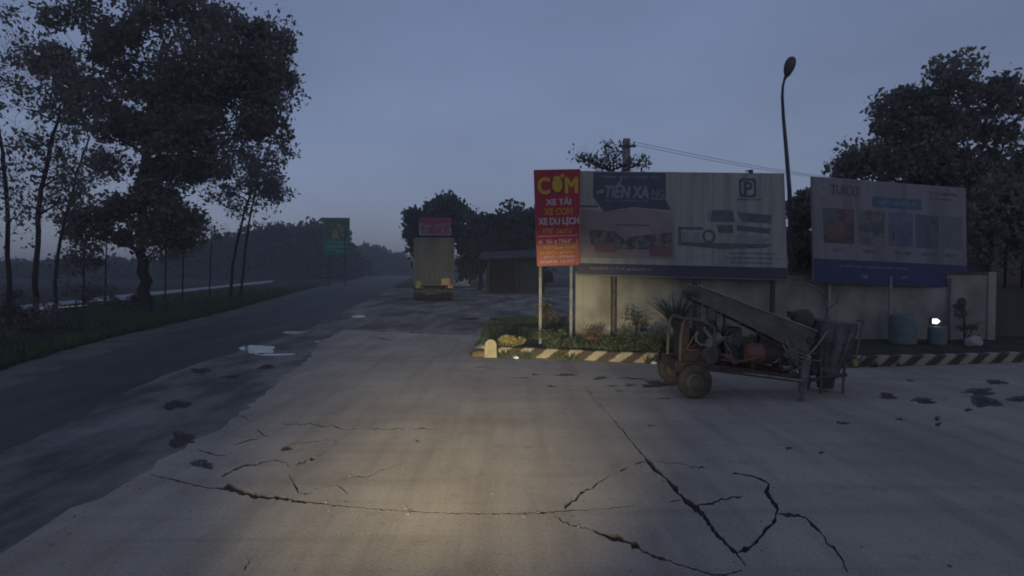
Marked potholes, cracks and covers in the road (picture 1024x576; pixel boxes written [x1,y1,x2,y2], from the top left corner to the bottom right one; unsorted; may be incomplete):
crack [151,392,848,576]
pothole [189,459,214,469]
pothole [168,431,195,449]
pothole [970,395,1004,408]
pothole [163,399,193,410]
